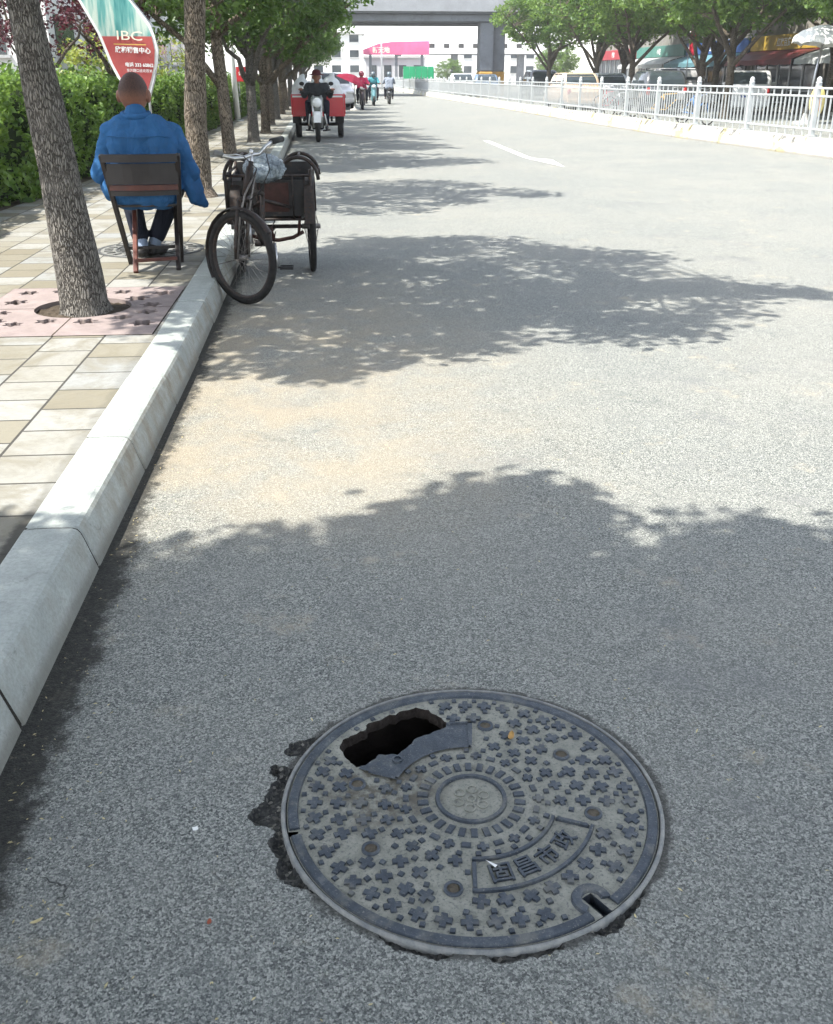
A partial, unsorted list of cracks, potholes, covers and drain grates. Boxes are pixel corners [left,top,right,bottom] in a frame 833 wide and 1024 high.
manhole cover [98,241,204,258]
crack [40,877,73,901]
